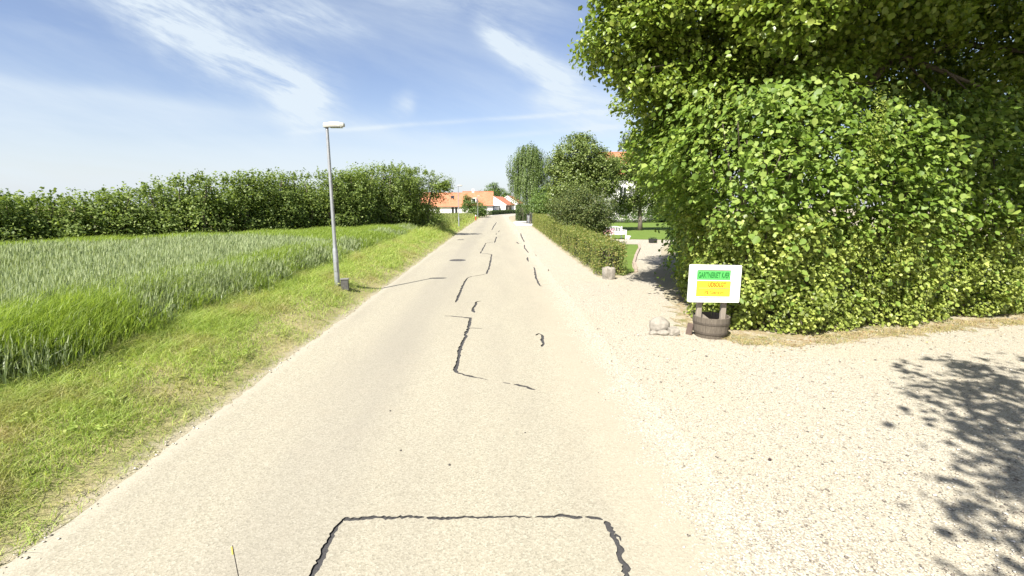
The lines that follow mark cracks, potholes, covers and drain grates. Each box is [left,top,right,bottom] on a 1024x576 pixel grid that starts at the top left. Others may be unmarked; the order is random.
crack [452,222,535,390]
crack [517,233,540,286]
